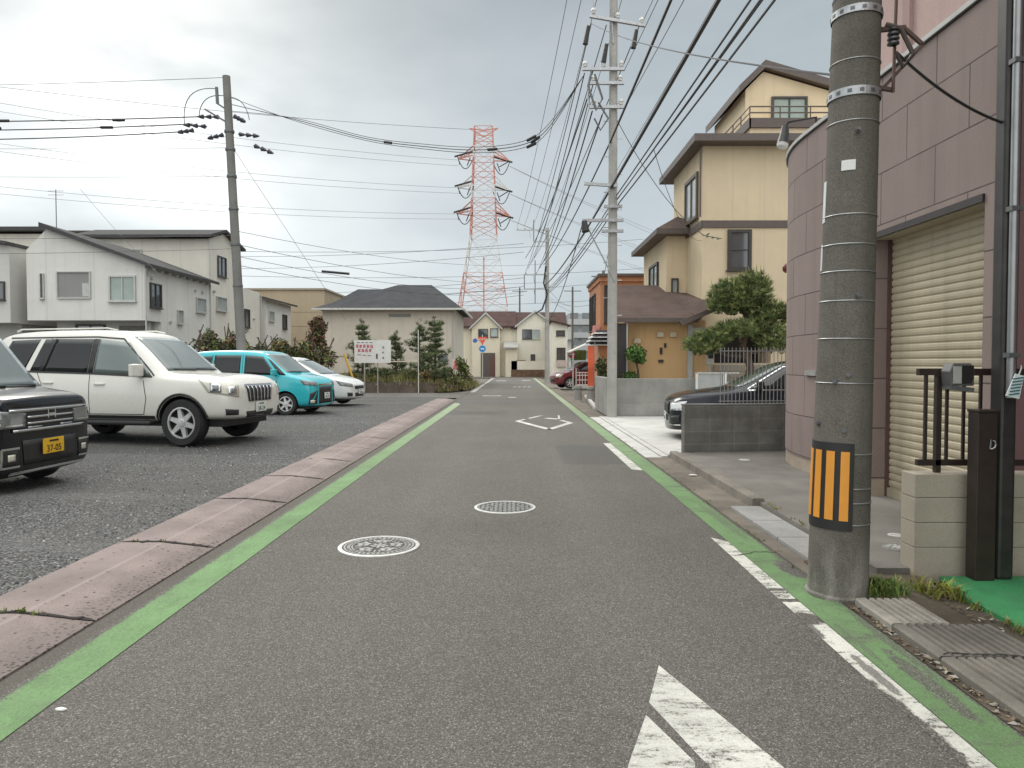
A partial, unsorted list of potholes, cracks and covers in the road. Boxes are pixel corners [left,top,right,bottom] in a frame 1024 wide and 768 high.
manhole cover [474,501,536,514]
manhole cover [338,536,420,558]
